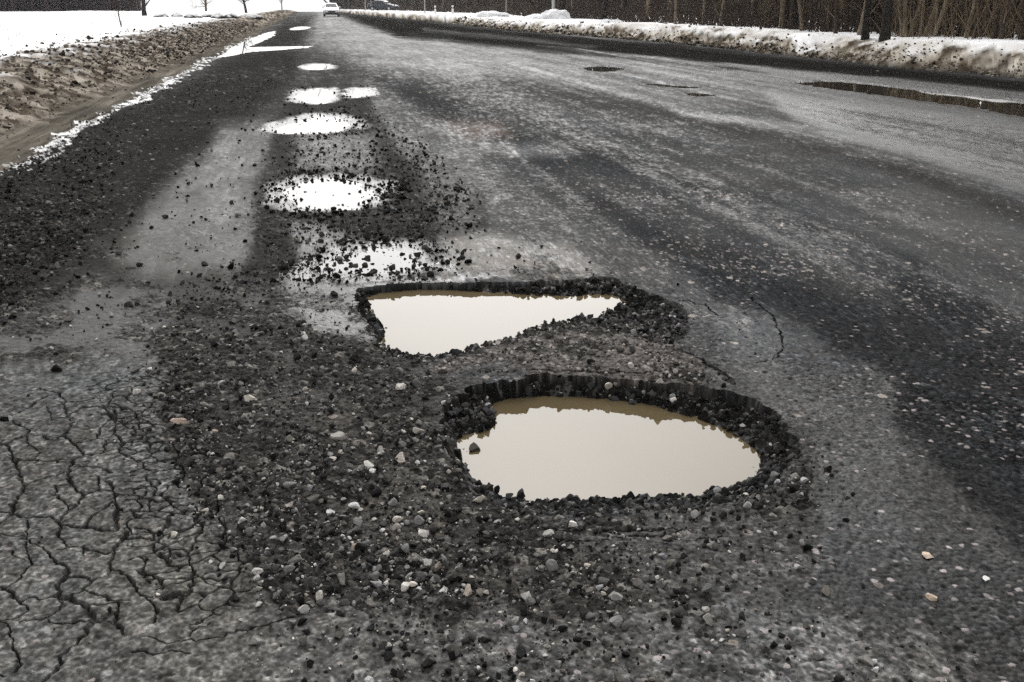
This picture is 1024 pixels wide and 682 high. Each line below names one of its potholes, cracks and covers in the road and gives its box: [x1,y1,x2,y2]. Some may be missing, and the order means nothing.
pothole [251,110,369,139]
pothole [263,171,402,217]
pothole [300,62,337,72]
pothole [353,276,695,360]
pothole [436,372,804,519]
pothole [282,235,456,283]
pothole [341,86,378,100]
crack [0,375,296,682]
pothole [573,65,631,73]
pothole [284,85,345,107]
crack [532,296,785,390]
